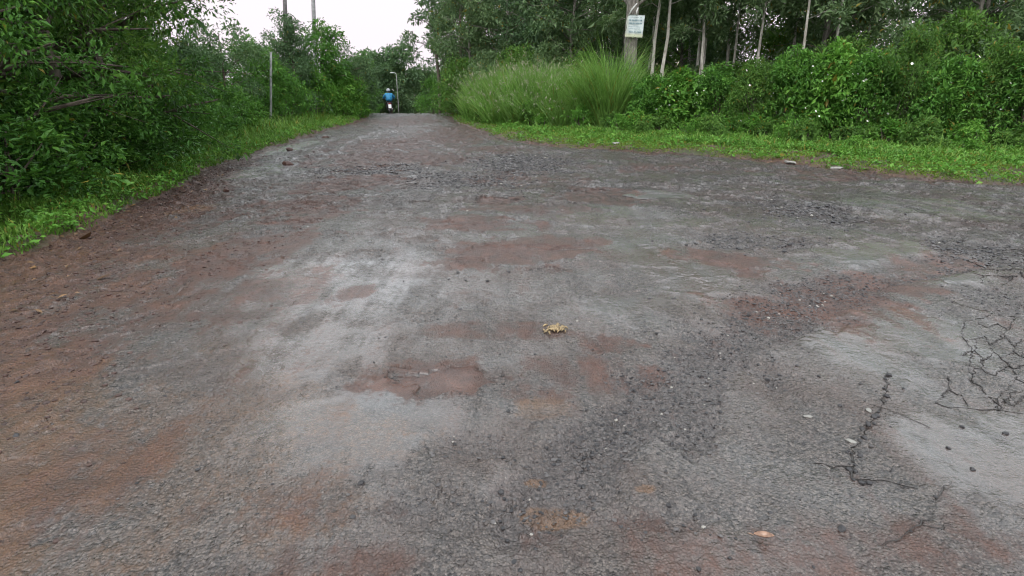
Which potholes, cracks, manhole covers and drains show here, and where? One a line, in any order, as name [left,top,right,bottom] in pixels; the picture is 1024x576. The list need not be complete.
crack [814,376,929,488]
crack [935,301,1024,414]
crack [882,482,952,545]
pothole [385,361,507,399]
